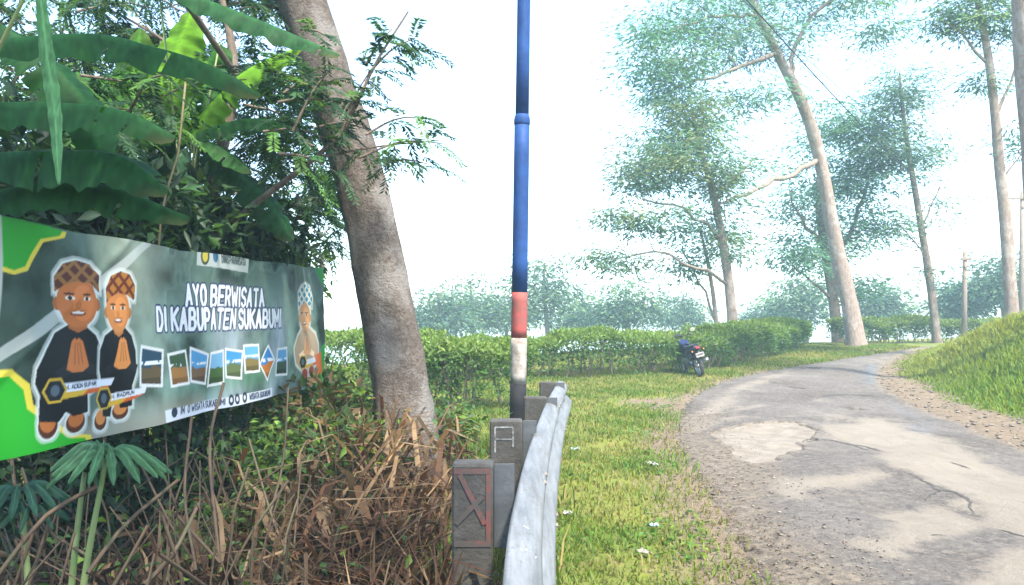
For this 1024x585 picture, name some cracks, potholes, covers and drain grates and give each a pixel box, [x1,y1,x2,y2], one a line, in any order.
crack [802,436,880,451]
crack [917,477,974,513]
pothole [703,420,824,465]
